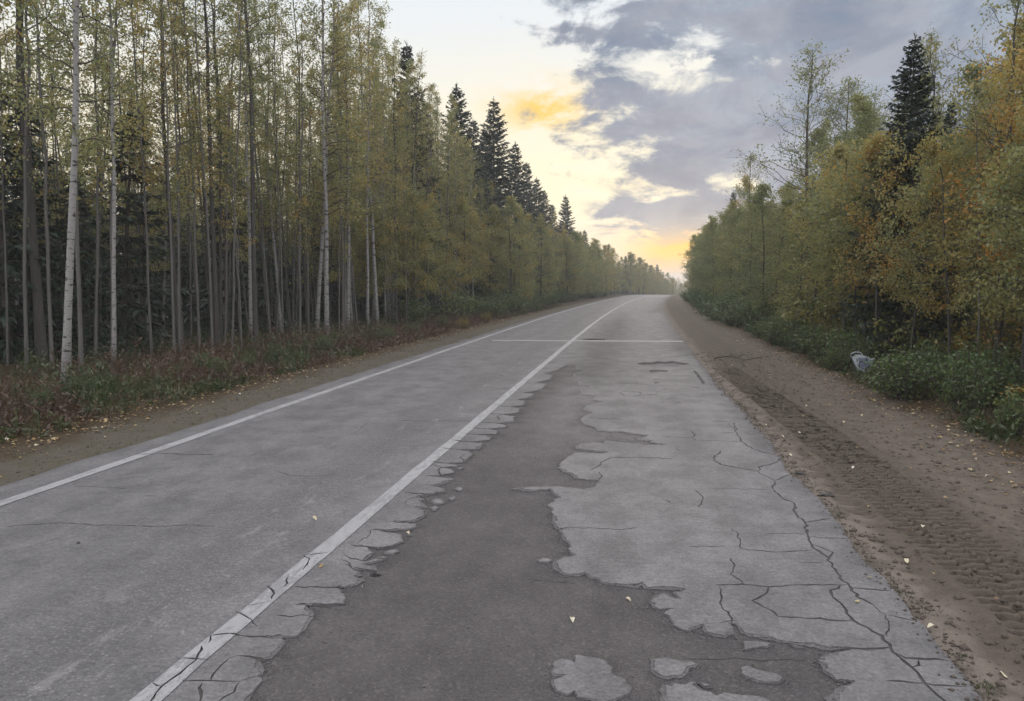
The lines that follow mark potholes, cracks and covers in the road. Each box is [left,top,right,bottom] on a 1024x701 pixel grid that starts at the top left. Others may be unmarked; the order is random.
crack [590,449,680,479]
crack [667,422,969,701]
crack [6,523,200,546]
crack [151,406,514,701]
